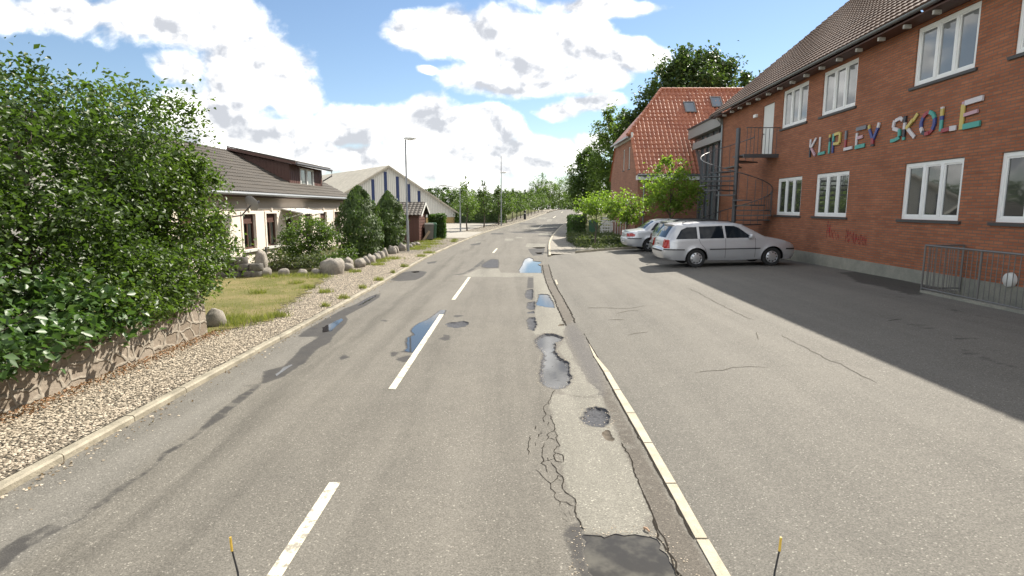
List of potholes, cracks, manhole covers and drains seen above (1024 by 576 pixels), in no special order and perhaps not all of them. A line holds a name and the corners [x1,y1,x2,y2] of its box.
crack [527,391,585,530]
pothole [519,257,542,273]
pothole [580,407,610,427]
crack [621,442,682,576]
pothole [526,317,537,331]
pothole [534,333,572,389]
pothole [582,534,679,576]
pothole [535,294,555,308]
crack [688,288,875,382]
